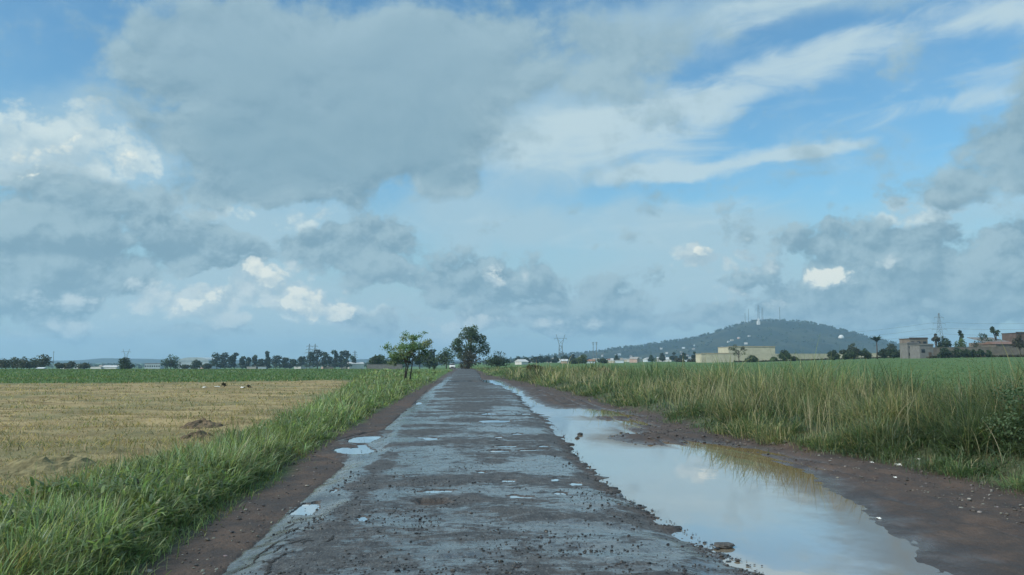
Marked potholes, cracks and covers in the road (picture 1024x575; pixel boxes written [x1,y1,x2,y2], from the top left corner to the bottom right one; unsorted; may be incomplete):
crack [229,521,334,575]
pothole [286,500,322,516]
pothole [331,435,386,454]
pothole [409,497,456,506]
